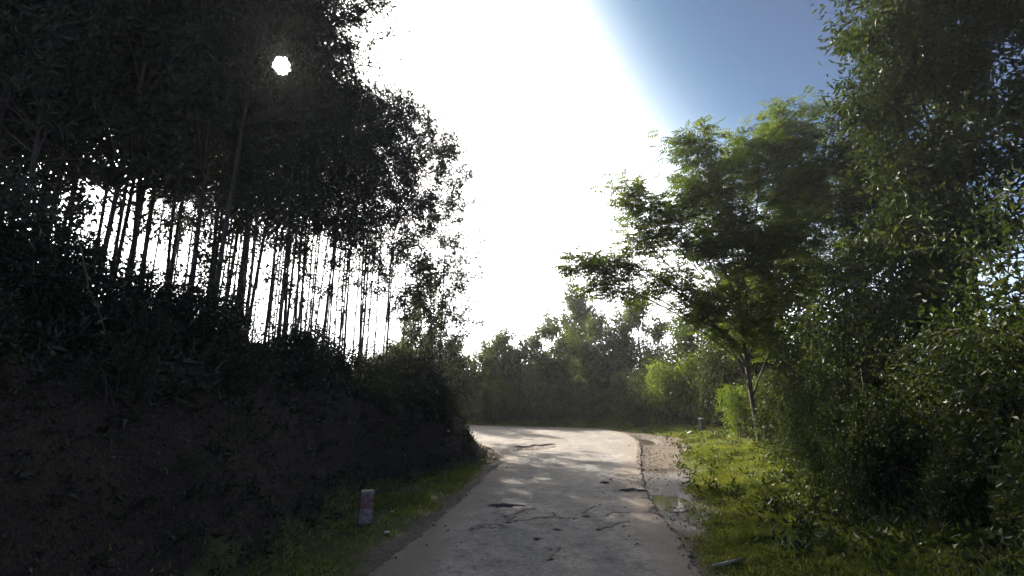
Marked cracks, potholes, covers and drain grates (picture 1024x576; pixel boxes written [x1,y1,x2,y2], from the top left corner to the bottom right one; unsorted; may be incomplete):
crack [543,548,566,560]
crack [472,506,630,531]
